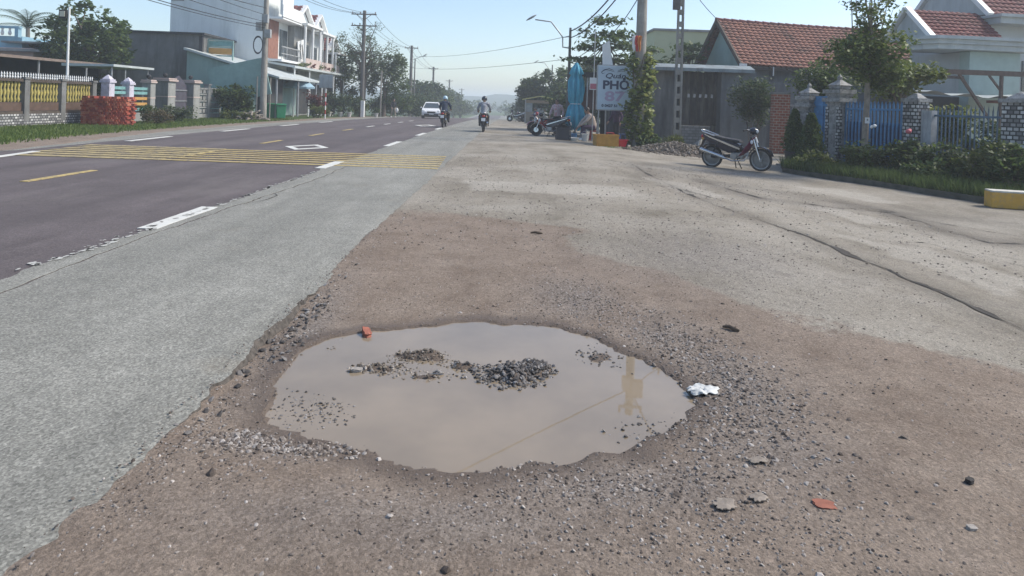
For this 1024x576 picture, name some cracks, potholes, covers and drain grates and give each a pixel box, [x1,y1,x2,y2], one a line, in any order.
crack [632,164,1019,326]
pothole [261,320,699,473]
